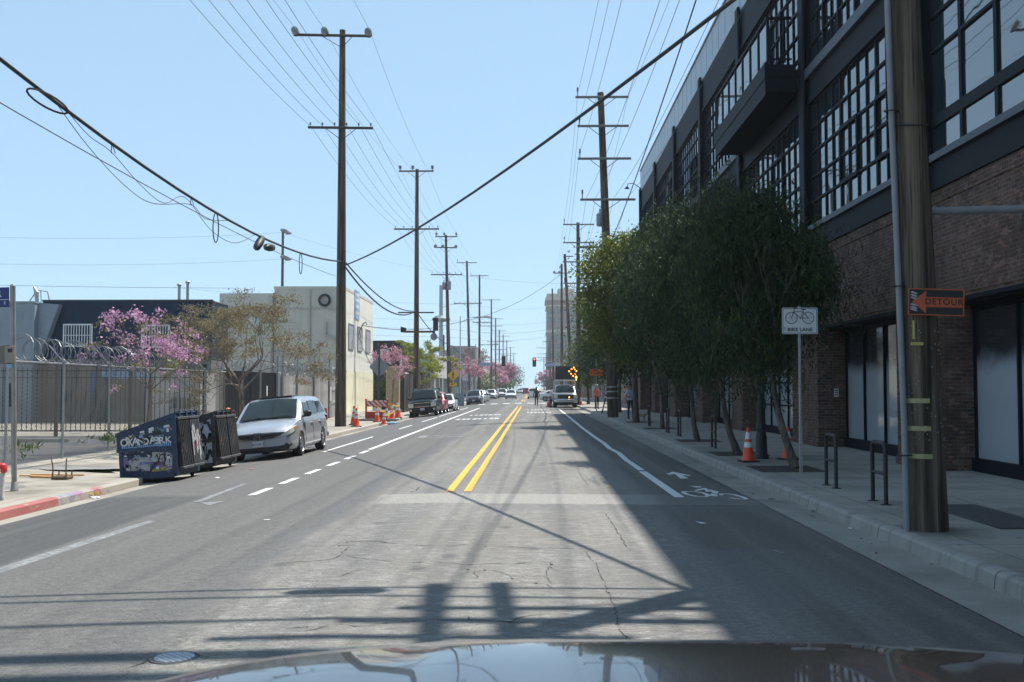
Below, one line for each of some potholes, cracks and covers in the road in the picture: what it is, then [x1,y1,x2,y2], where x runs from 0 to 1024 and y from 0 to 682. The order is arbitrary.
manhole cover [148,651,200,664]
crack [586,552,627,638]
crack [297,541,568,587]
